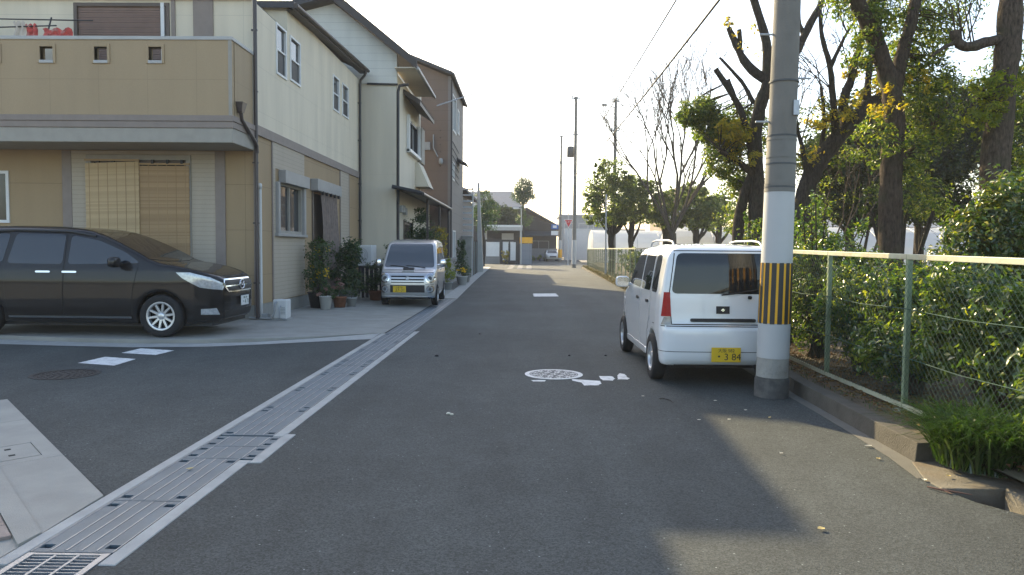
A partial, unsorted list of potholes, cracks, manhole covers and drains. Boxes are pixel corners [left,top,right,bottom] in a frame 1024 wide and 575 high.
manhole cover [28,369,101,380]
drain grate [0,552,111,575]
manhole cover [525,369,583,379]
